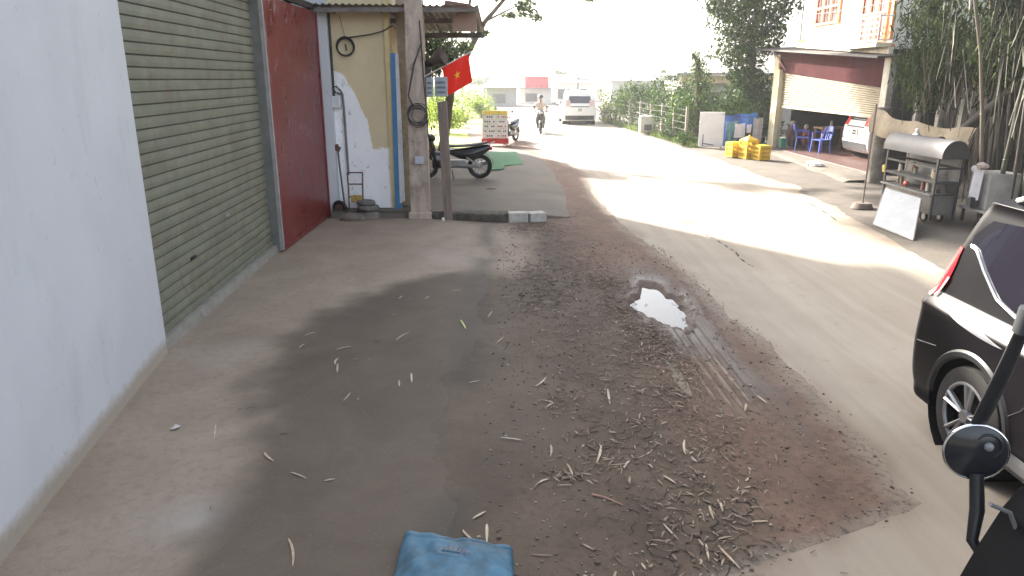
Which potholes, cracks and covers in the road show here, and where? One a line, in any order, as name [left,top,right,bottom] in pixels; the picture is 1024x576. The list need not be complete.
pothole [621,279,696,335]
crack [628,483,767,576]
